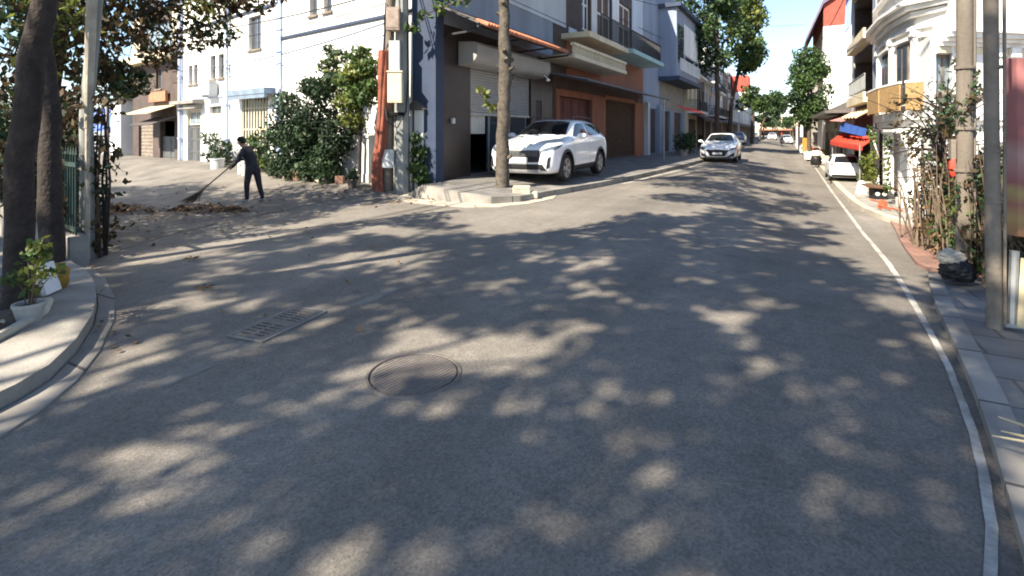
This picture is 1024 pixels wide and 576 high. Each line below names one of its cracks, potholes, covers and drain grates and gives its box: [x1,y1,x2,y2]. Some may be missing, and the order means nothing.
manhole cover [364,352,462,399]
drain grate [227,306,327,343]
